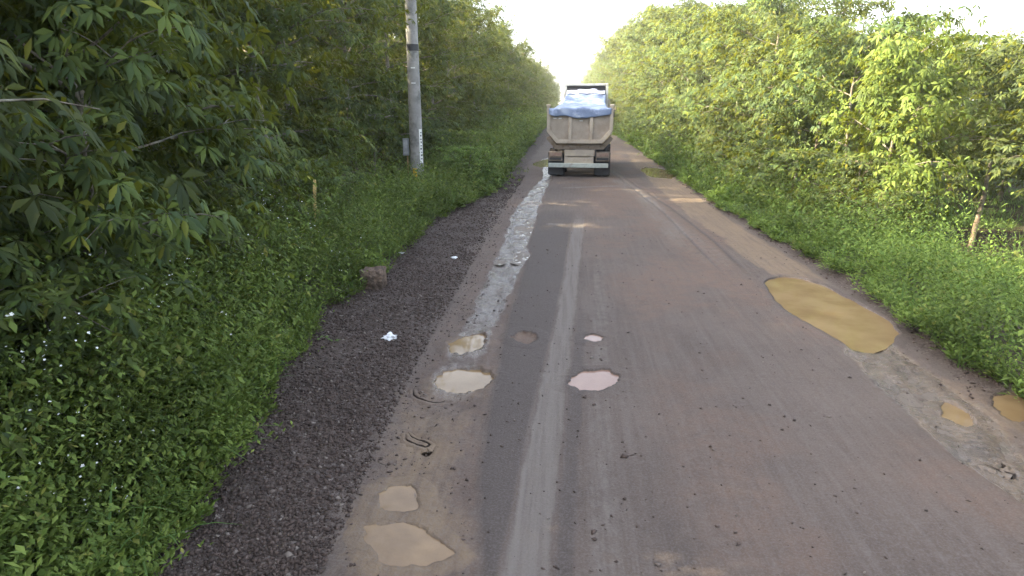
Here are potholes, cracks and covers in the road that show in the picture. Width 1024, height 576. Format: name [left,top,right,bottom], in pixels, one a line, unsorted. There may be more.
pothole [357,475,439,526]
pothole [527,158,548,168]
pothole [568,329,618,348]
pothole [552,364,635,399]
pothole [433,328,501,361]
pothole [635,166,677,180]
crack [407,389,448,406]
pothole [417,362,510,403]
pothole [757,274,915,361]
pothole [968,384,1024,431]
pothole [342,510,479,576]
crack [400,432,436,456]
